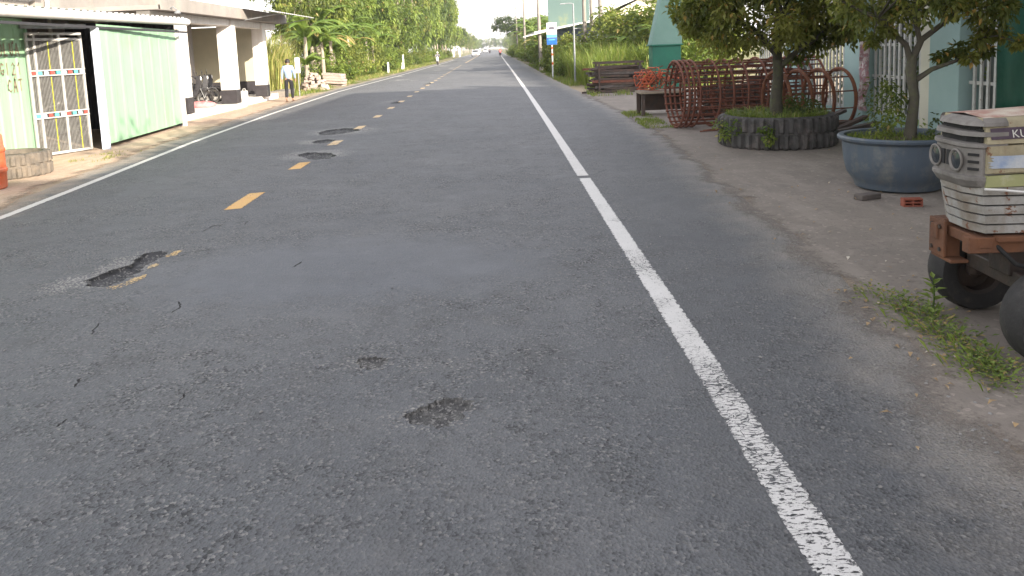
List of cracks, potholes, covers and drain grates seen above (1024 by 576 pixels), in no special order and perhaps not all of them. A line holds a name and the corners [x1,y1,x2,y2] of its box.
pothole [299,152,336,160]
pothole [402,397,476,429]
pothole [356,356,390,370]
pothole [83,250,173,288]
